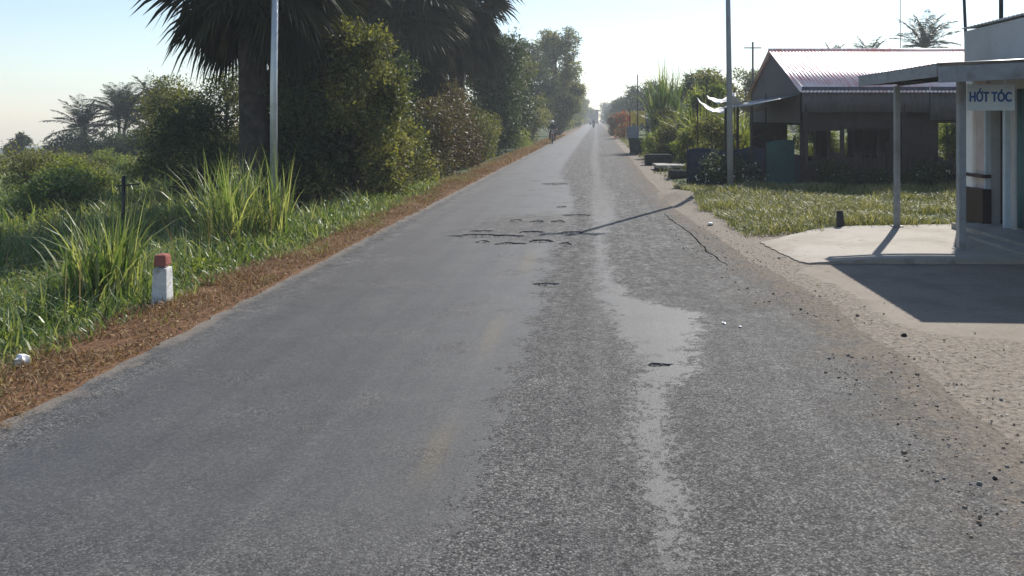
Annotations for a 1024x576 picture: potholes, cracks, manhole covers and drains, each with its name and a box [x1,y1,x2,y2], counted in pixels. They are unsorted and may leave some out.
crack [664,213,728,266]
